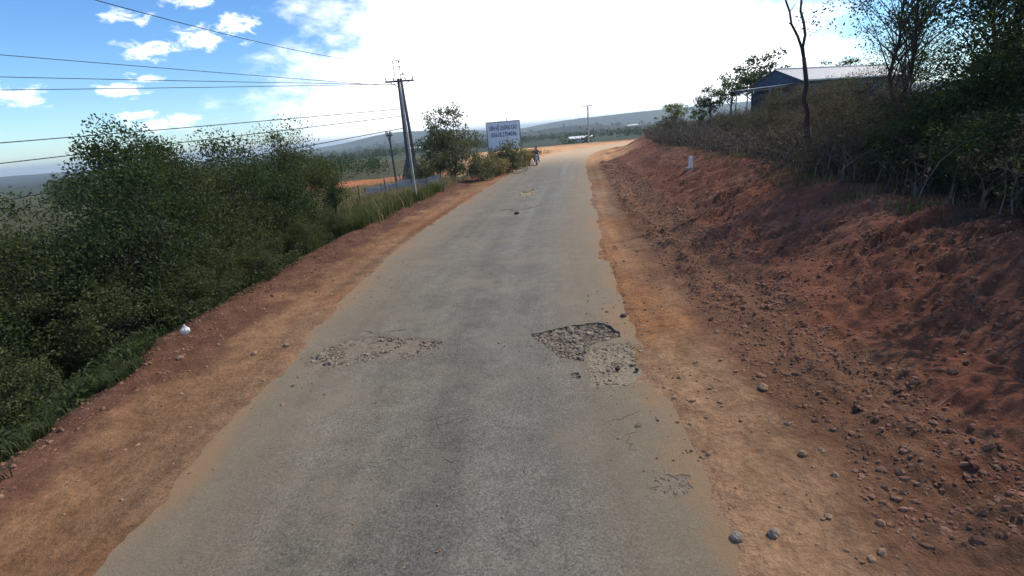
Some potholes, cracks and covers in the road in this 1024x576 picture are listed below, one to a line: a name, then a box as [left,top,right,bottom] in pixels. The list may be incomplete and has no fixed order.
pothole [531,322,620,361]
pothole [583,341,655,388]
pothole [517,188,539,198]
pothole [305,335,444,371]
pothole [649,474,693,499]
